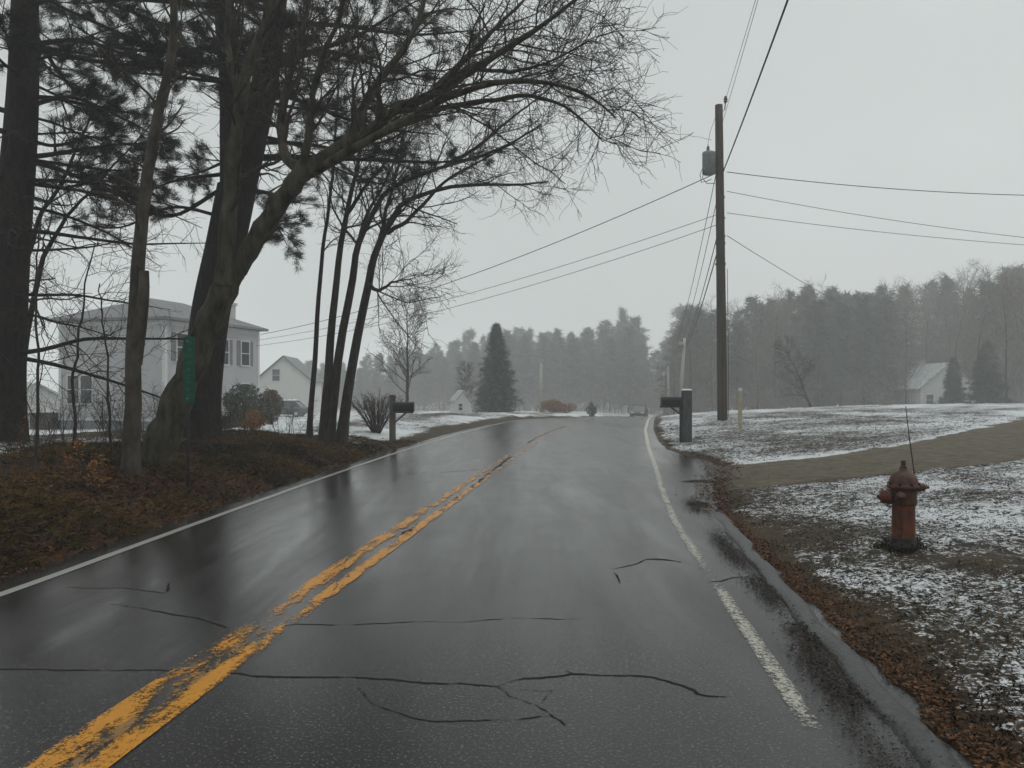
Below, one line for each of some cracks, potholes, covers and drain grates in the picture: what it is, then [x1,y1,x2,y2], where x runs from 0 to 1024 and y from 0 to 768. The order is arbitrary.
crack [614,558,681,583]
crack [77,582,228,628]
crack [285,618,576,626]
crack [0,668,728,725]
